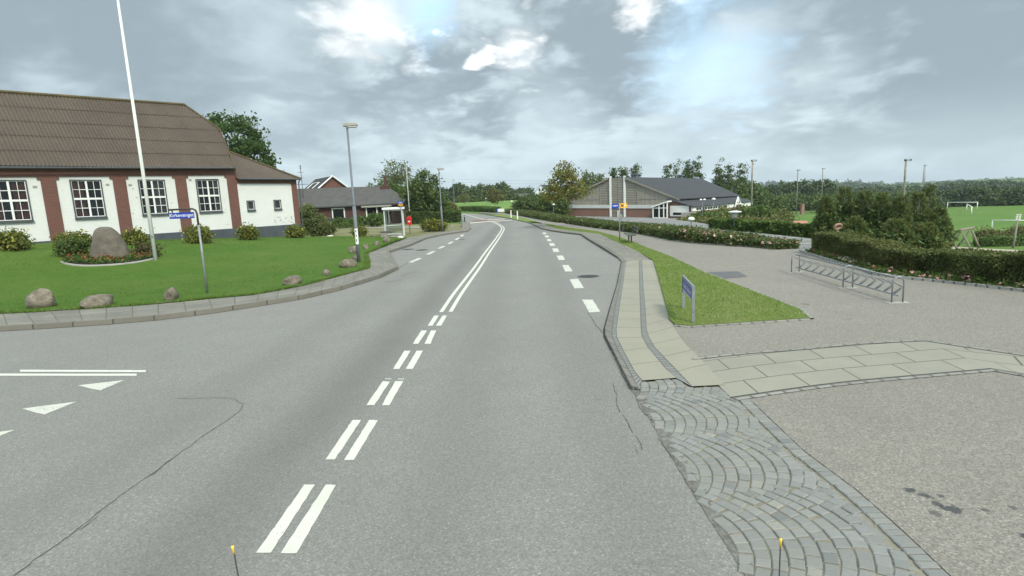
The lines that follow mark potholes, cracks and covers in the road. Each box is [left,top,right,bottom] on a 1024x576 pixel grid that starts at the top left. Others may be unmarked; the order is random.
crack [13,397,243,576]
